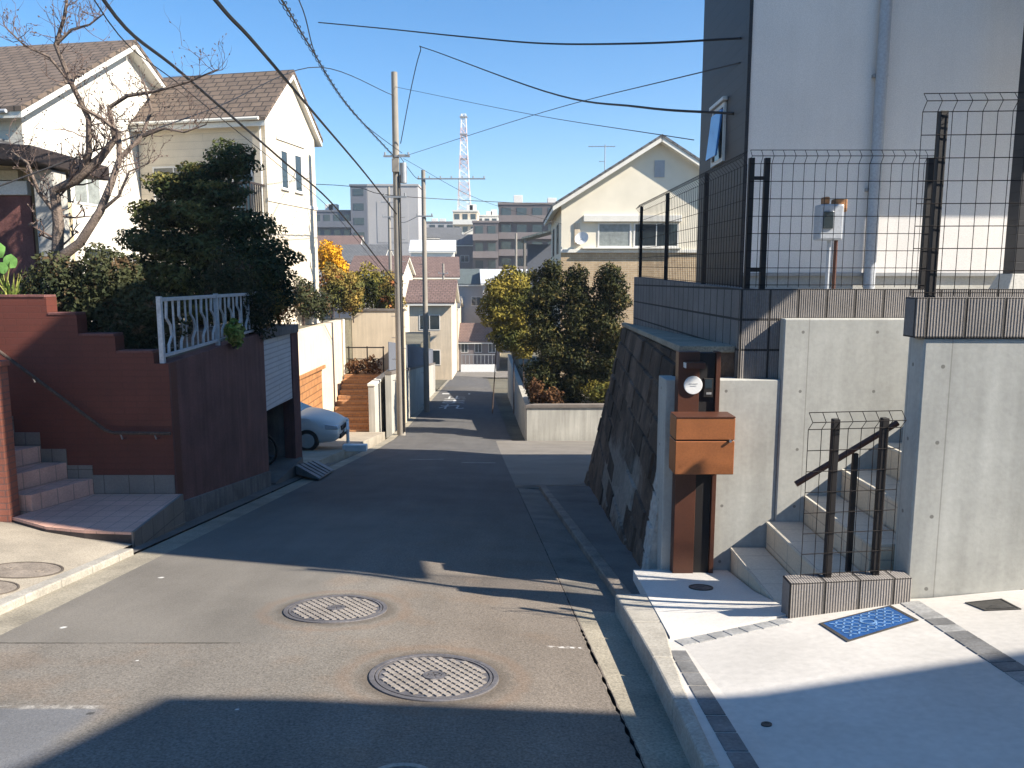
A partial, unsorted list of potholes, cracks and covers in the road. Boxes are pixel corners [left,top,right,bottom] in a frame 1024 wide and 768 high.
utility cover [0,580,20,595]
drain grate [965,598,1021,611]
manhole cover [369,654,499,702]
utility cover [0,562,64,579]
manhole cover [283,594,387,624]
